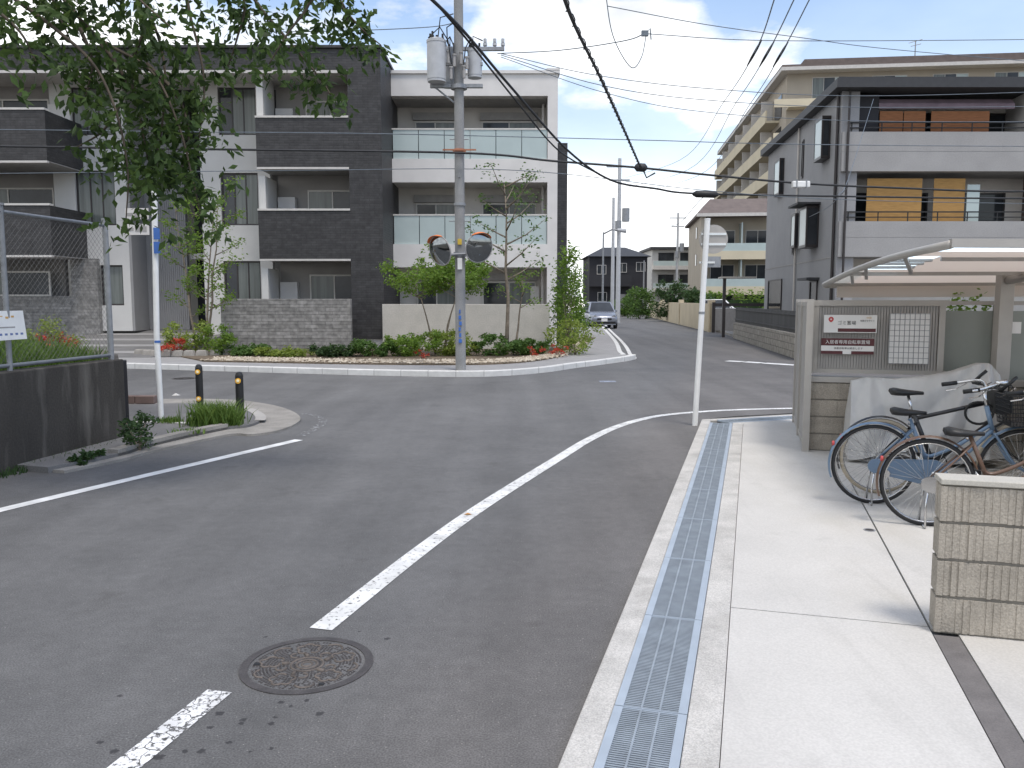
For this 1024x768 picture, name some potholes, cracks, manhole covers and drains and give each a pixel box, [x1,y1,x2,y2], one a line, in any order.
drain grate [615,615,702,717]
drain grate [645,557,711,621]
manhole cover [239,637,373,695]
drain grate [702,434,731,451]
drain grate [593,705,687,768]
drain grate [696,448,728,468]
drain grate [678,488,722,522]
drain grate [665,517,717,561]
drain grate [688,466,726,490]
drain grate [706,422,733,435]
